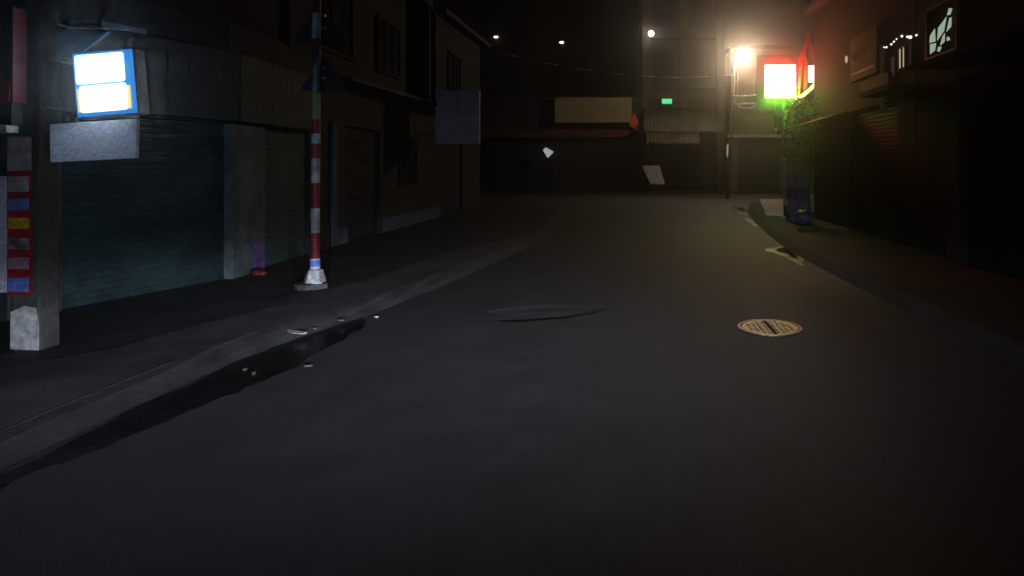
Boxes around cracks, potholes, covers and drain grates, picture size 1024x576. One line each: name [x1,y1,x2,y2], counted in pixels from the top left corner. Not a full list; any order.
pothole [484,304,610,322]
manhole cover [737,319,803,336]
